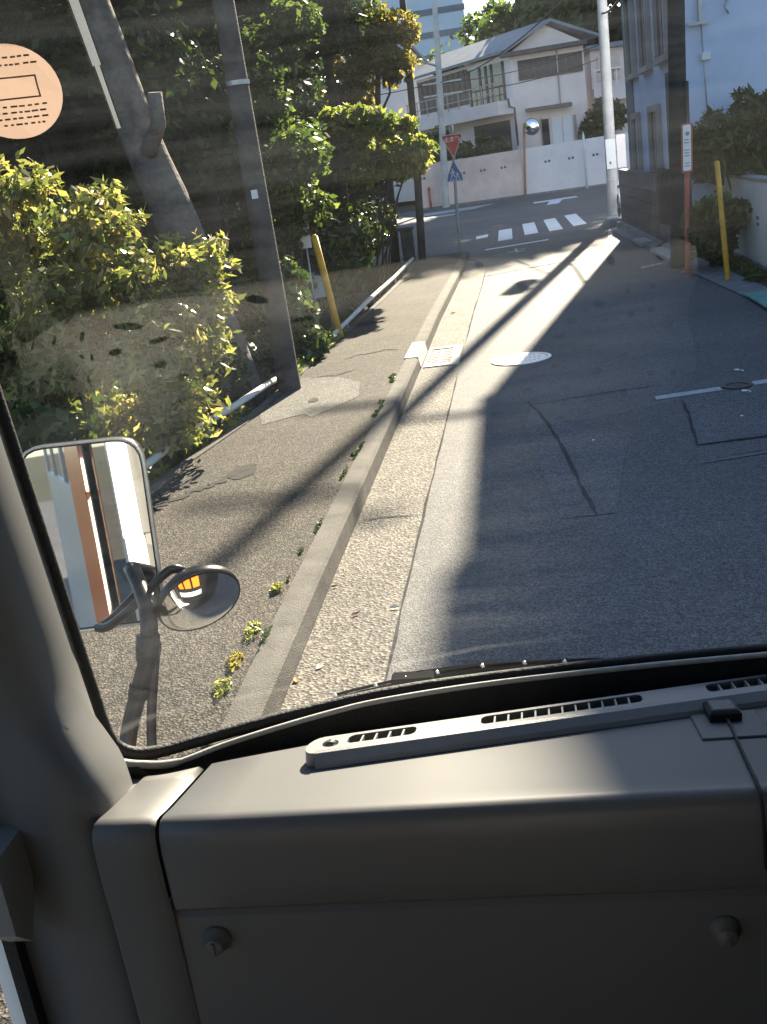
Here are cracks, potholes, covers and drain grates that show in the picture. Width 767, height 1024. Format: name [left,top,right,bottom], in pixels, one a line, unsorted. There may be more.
manhole cover [491,352,551,366]
crack [310,349,400,379]
drain grate [423,344,463,368]
utility cover [722,382,752,390]
